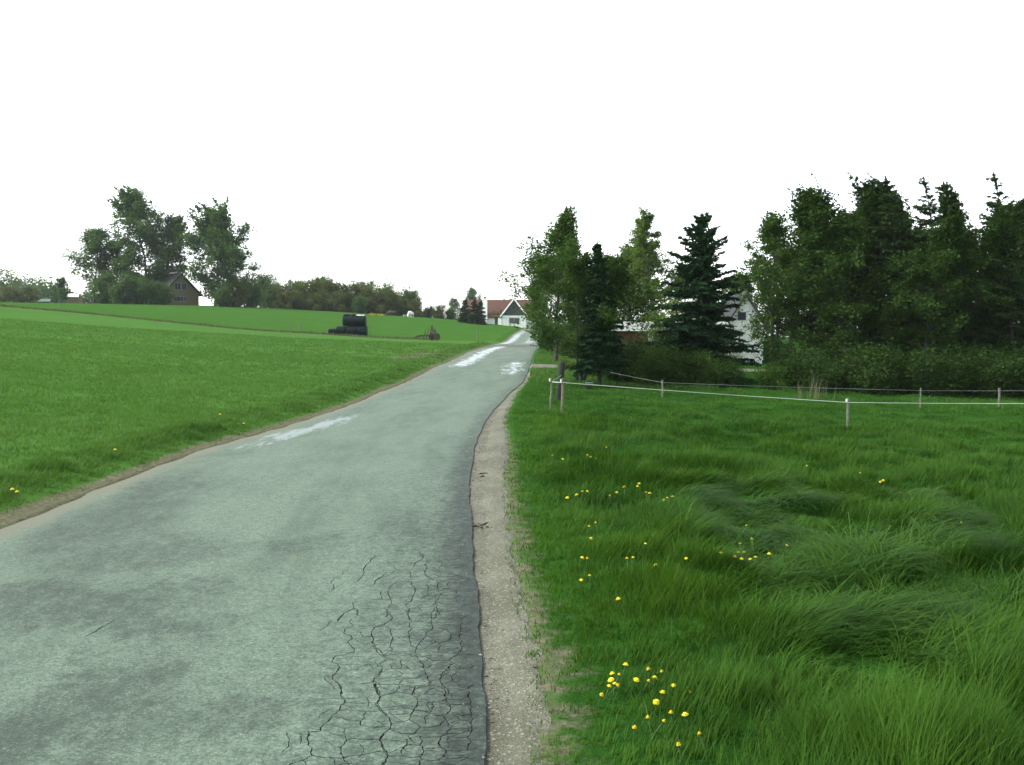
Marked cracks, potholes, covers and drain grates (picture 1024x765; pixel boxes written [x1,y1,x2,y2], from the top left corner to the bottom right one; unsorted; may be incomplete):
crack [282,525,479,765]
